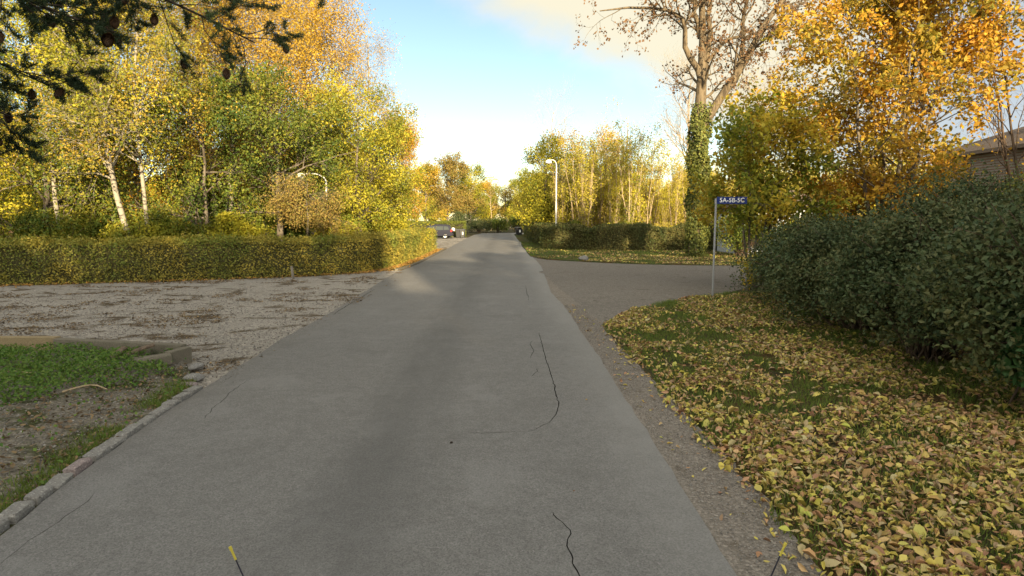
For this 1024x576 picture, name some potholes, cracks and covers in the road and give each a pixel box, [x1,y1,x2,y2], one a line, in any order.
crack [494,335,559,433]
crack [553,514,580,576]
